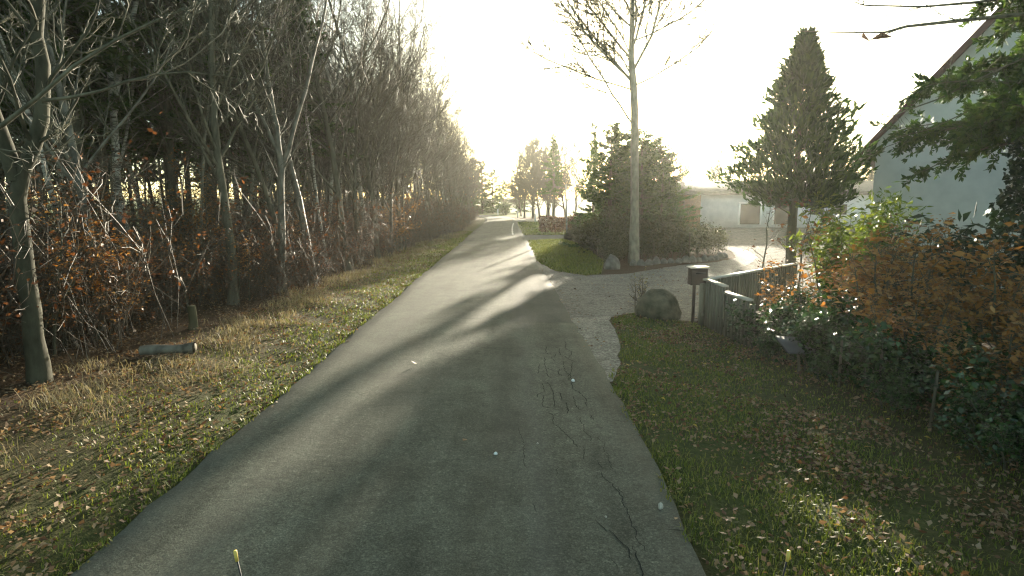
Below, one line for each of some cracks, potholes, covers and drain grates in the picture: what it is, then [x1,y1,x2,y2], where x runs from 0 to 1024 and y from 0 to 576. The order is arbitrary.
crack [537,346,645,576]
